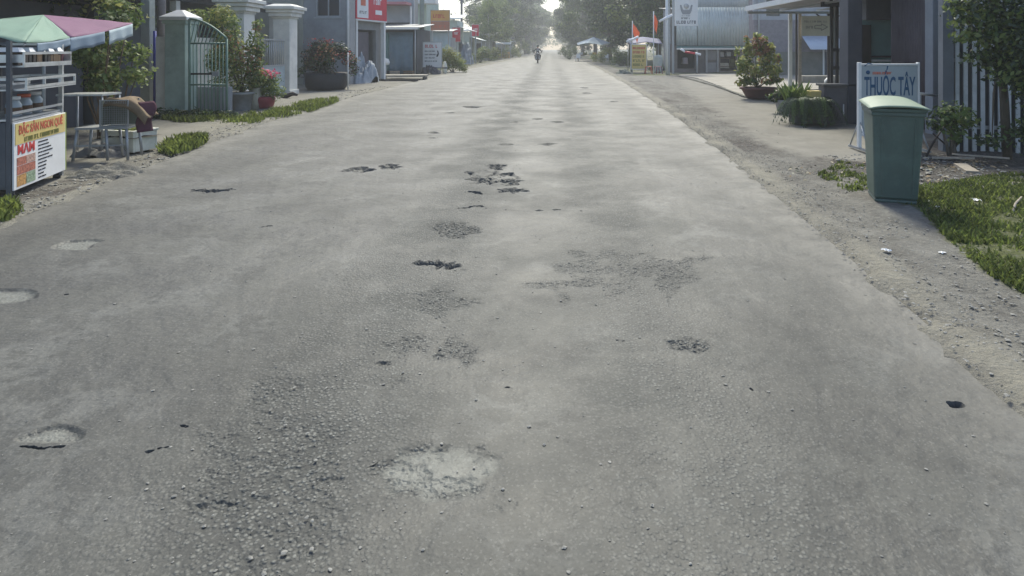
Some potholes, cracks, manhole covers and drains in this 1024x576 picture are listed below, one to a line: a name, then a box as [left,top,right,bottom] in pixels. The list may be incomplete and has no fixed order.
pothole [464,170,524,186]
pothole [664,336,718,355]
pothole [426,221,486,240]
pothole [365,440,506,504]
pothole [411,259,464,270]
pothole [13,423,87,444]
pothole [0,288,40,304]
